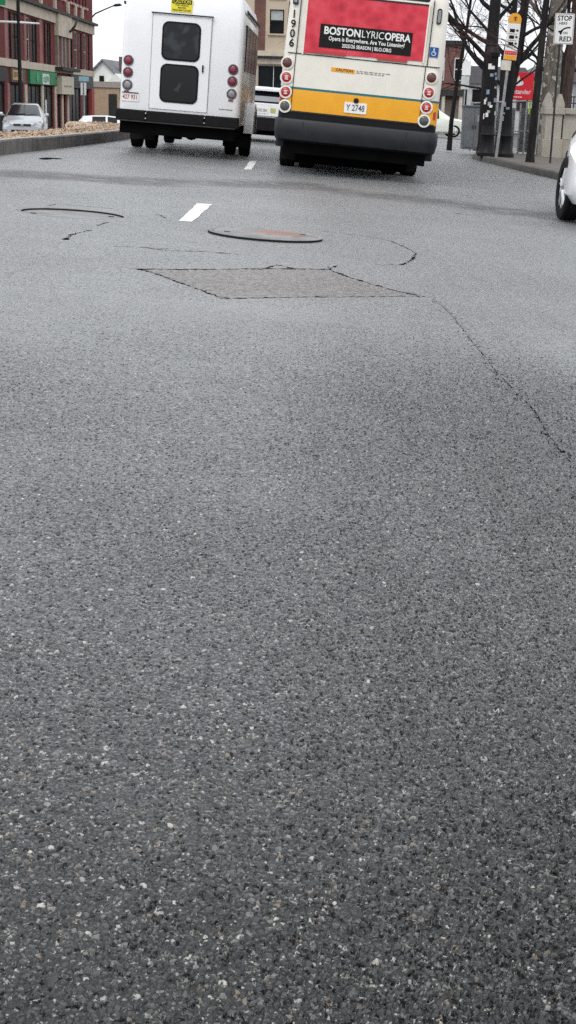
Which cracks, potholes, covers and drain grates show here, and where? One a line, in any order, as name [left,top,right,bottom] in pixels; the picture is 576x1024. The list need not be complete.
crack [114,231,571,468]
manhole cover [17,207,128,220]
crack [48,204,119,240]
manhole cover [208,227,322,243]
